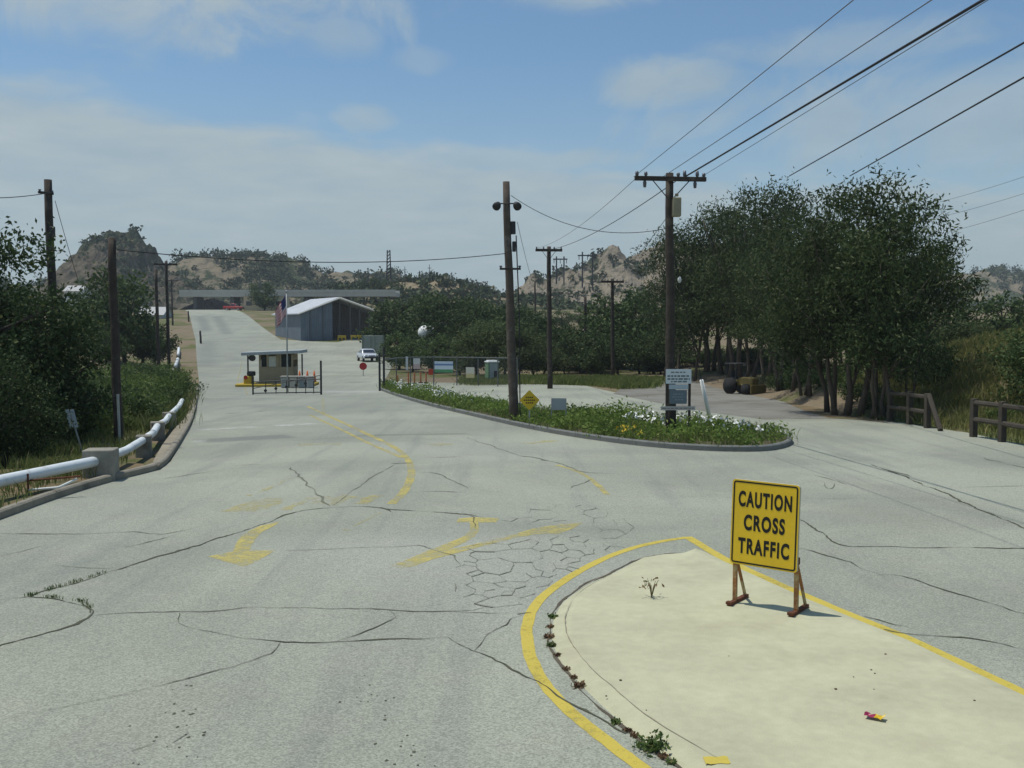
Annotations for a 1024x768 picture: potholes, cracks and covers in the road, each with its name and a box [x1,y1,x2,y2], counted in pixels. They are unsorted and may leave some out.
crack [0,505,716,757]
crack [797,472,1022,613]
crack [17,465,476,598]
